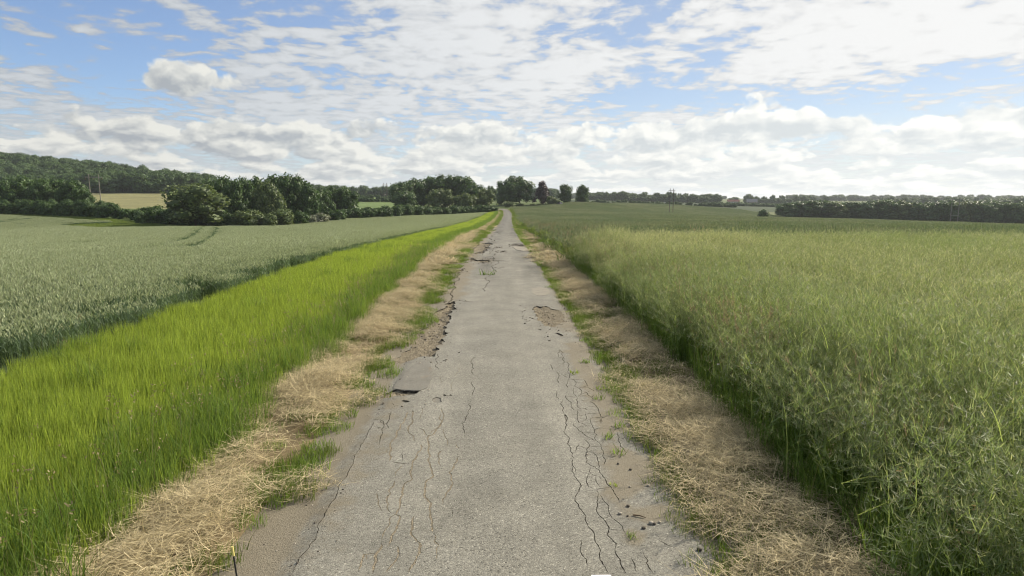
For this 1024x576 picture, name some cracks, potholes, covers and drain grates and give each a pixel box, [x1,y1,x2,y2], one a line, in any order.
pothole [474,243,493,254]
crack [293,354,475,573]
pothole [394,301,456,364]
pothole [532,306,565,327]
crack [552,349,676,573]
